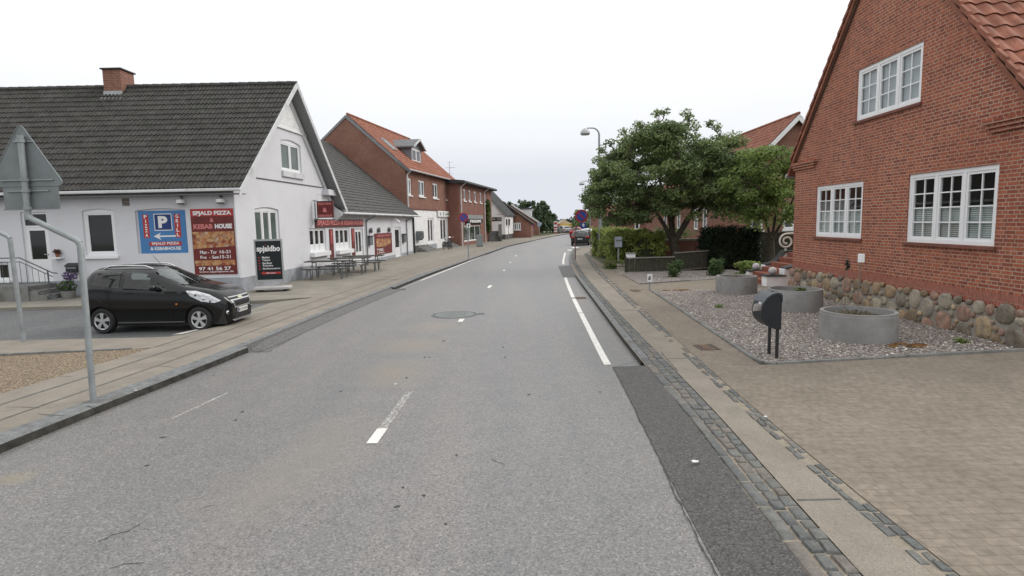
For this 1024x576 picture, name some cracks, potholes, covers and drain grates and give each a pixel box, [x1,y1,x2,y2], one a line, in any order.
manhole cover [431,311,485,319]
